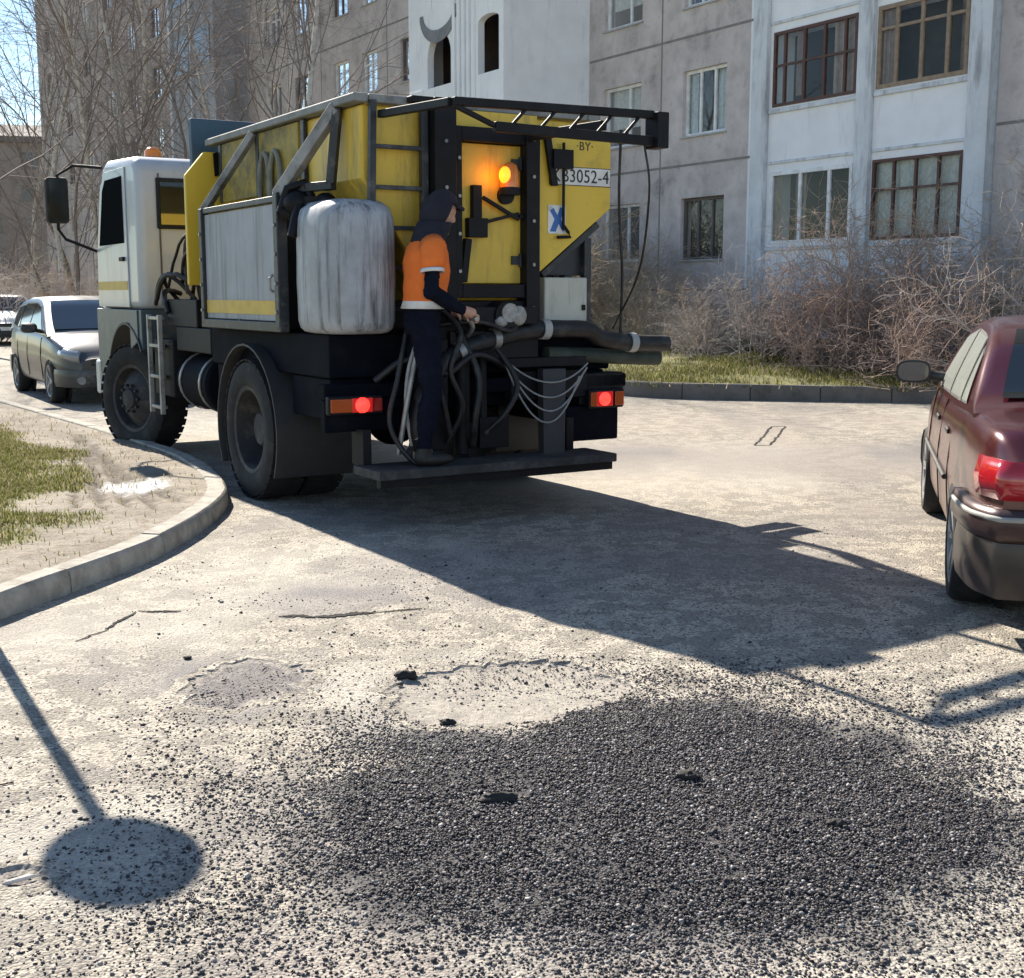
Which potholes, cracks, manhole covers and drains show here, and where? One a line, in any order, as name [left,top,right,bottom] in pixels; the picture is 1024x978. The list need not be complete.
crack [279,608,422,618]
pothole [161,655,329,716]
crack [75,610,179,642]
pothole [371,655,652,732]
